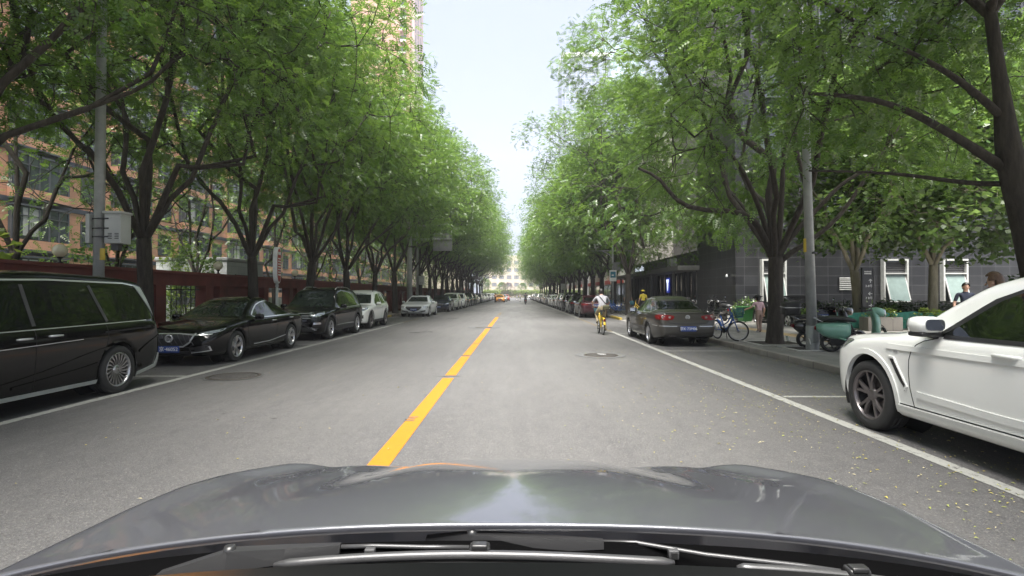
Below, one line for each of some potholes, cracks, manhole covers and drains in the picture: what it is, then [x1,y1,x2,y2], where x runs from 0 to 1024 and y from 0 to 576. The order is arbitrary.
manhole cover [201,372,264,381]
